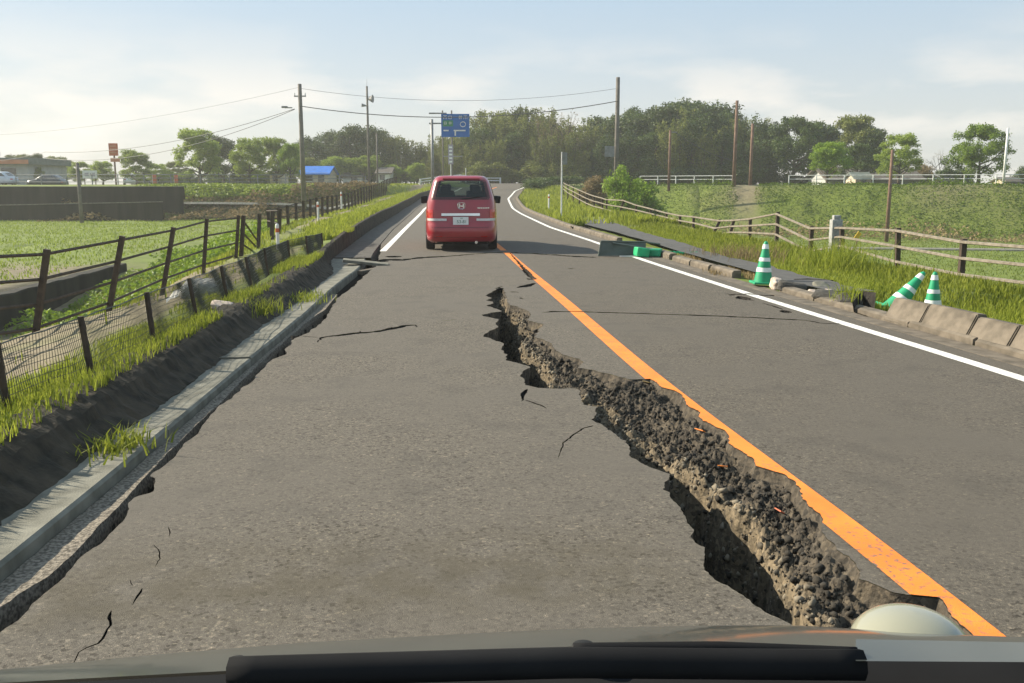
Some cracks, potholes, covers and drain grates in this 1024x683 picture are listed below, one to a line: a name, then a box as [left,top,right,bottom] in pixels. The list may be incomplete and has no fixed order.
crack [60,252,971,661]
